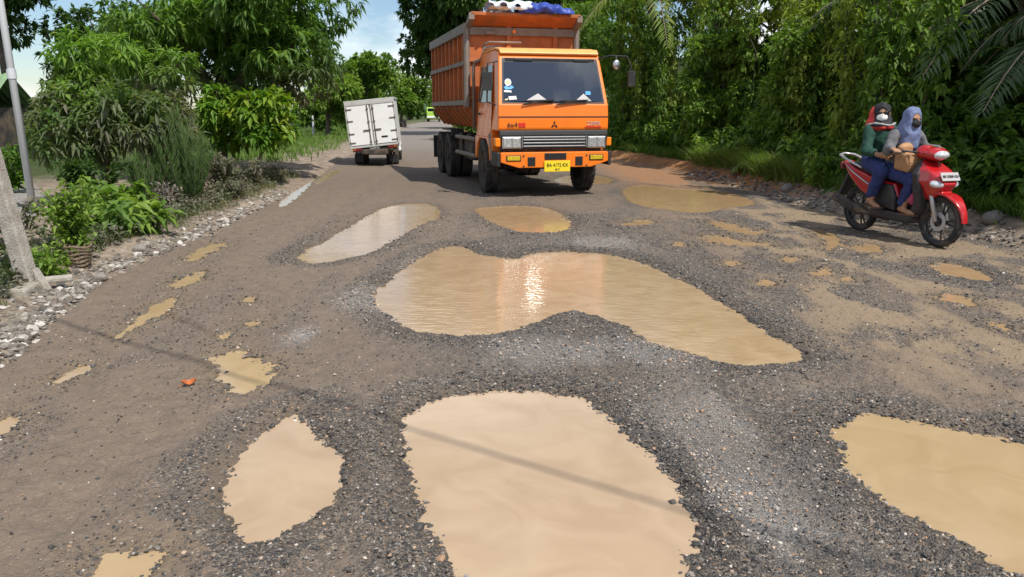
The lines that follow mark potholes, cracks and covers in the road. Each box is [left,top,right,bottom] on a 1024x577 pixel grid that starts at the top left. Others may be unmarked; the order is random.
pothole [367,374,743,577]
pothole [354,240,829,368]
pothole [914,257,1009,283]
pothole [614,182,764,213]
pothole [184,392,379,555]
pothole [188,340,306,403]
pothole [285,200,452,264]
pothole [805,396,1024,577]
pothole [465,203,583,233]
pothole [85,291,199,347]
